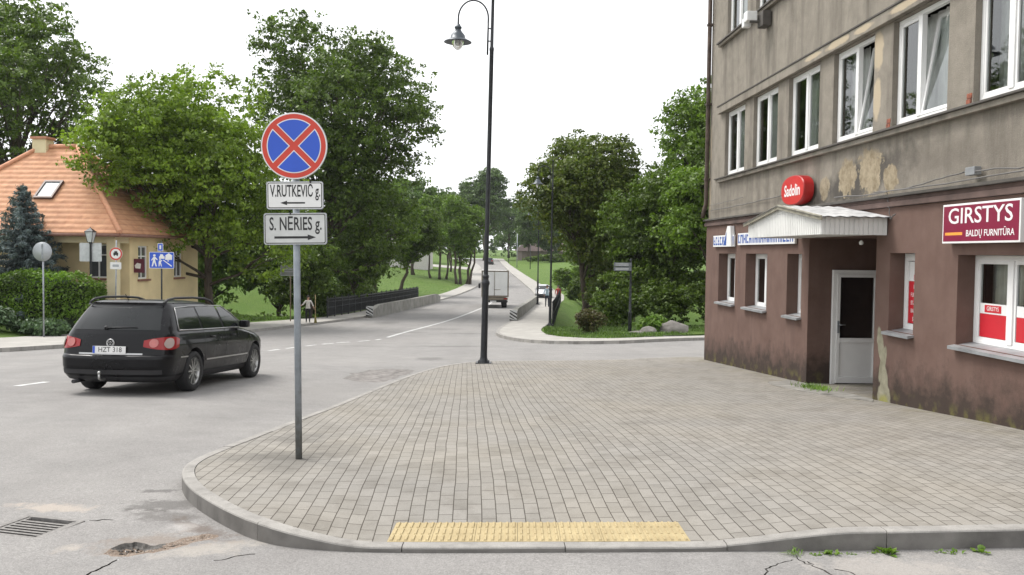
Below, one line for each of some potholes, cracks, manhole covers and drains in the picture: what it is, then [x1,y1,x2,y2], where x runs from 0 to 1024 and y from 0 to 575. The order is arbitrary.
drain grate [0,515,85,539]
crack [764,556,856,575]
pothole [104,534,219,557]
